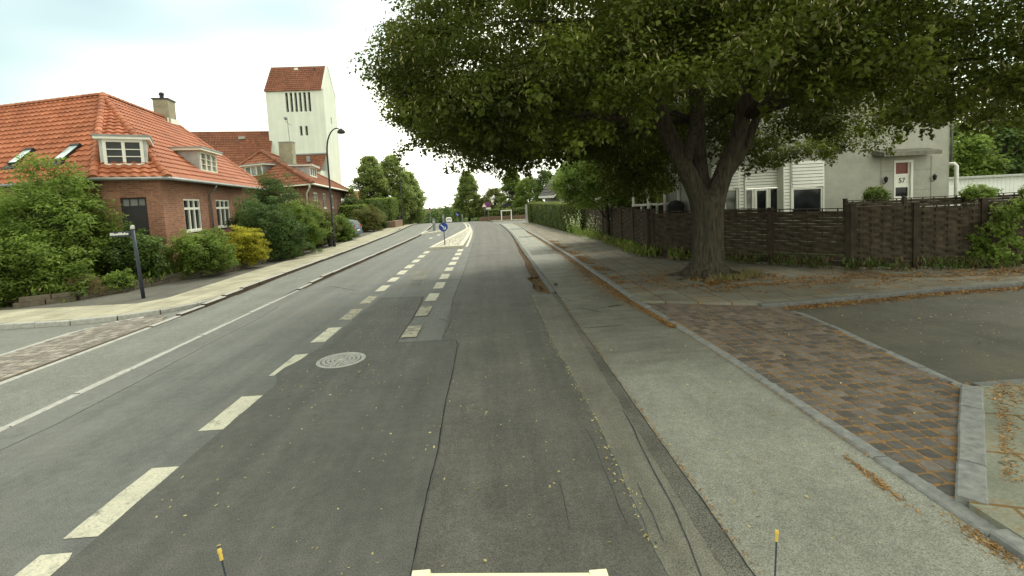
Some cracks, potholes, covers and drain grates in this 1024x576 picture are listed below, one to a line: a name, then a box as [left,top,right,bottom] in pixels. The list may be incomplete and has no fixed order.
crack [552,293,756,576]
manhole cover [316,352,366,368]
pothole [527,278,550,294]
